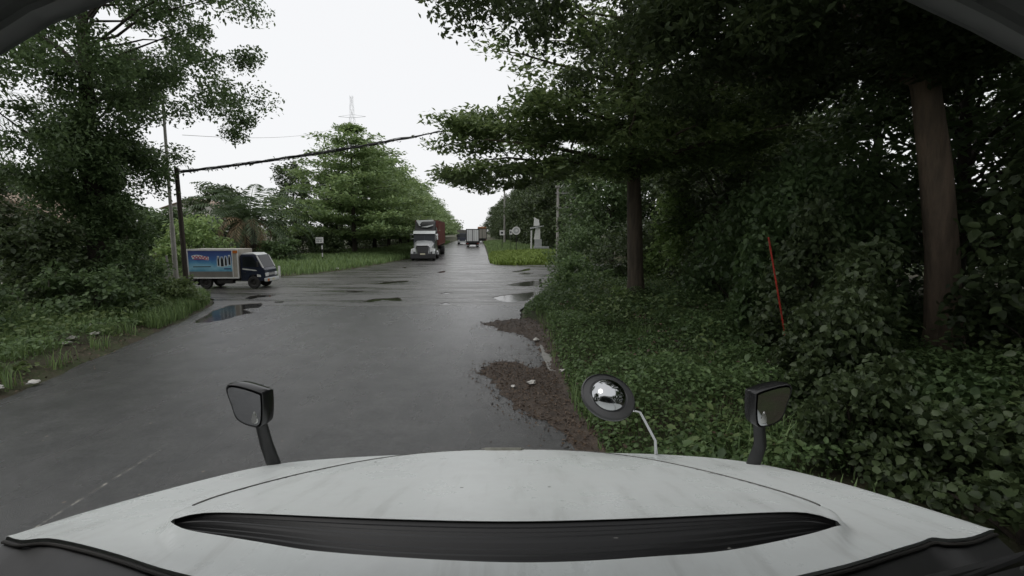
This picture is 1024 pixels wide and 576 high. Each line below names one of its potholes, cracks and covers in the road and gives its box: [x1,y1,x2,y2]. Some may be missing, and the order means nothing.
pothole [194,303,263,323]
pothole [492,292,534,303]
